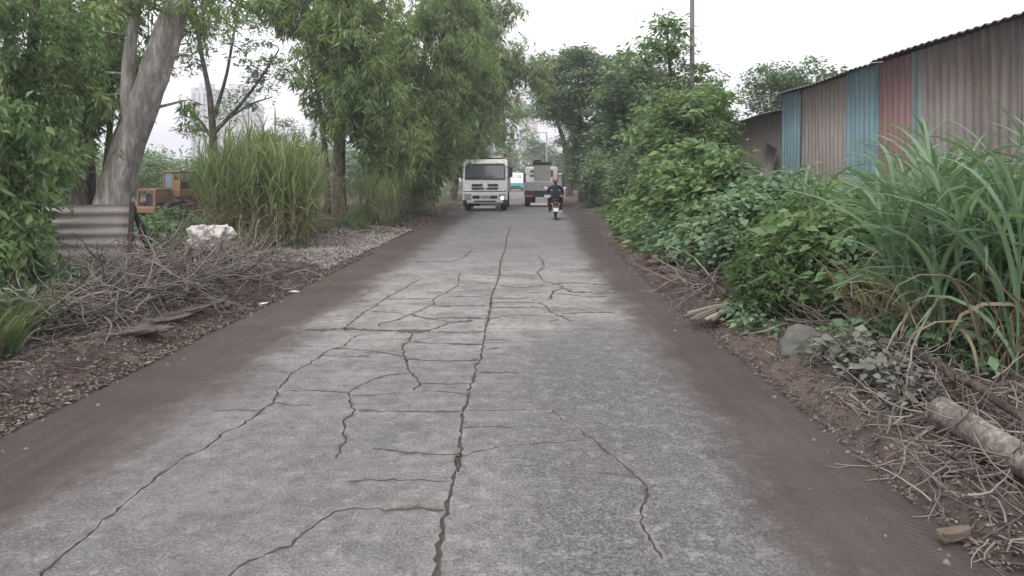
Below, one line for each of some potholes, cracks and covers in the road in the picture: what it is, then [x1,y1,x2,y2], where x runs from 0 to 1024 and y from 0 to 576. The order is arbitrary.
crack [40,250,485,576]
crack [537,257,612,322]
crack [552,410,663,559]
